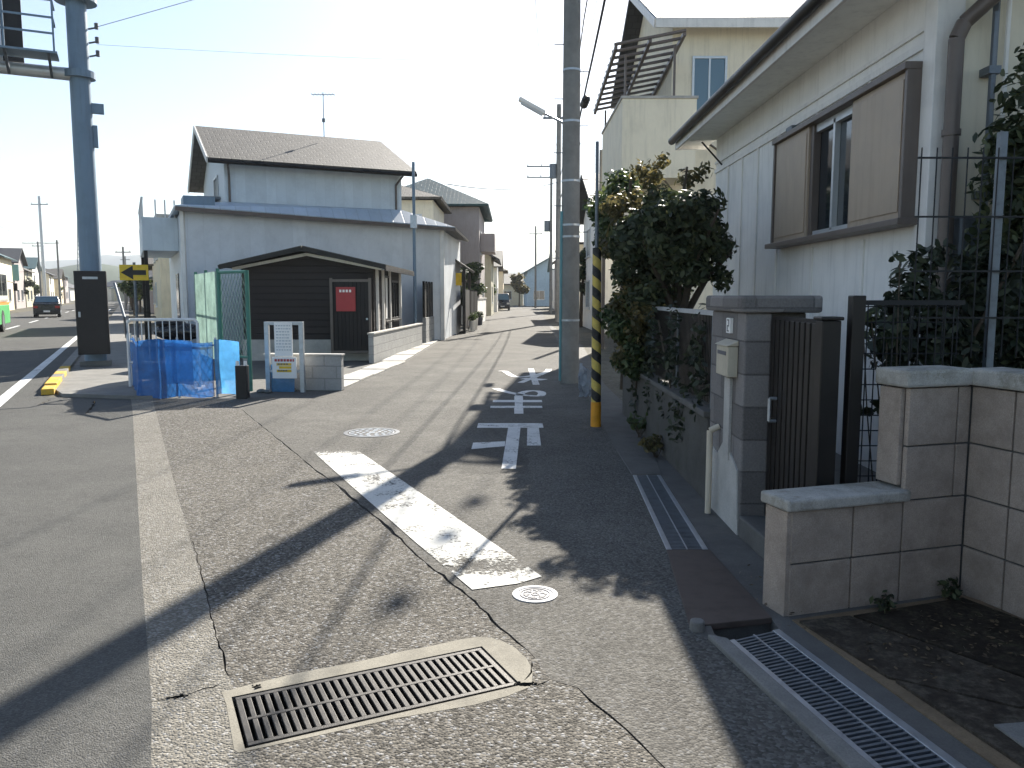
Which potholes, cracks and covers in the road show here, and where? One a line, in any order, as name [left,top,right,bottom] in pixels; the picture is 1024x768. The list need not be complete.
crack [159,543,229,701]
drain grate [730,629,967,768]
drain grate [633,475,708,550]
manhole cover [512,585,558,603]
drain grate [235,648,517,748]
manhole cover [343,428,400,437]
